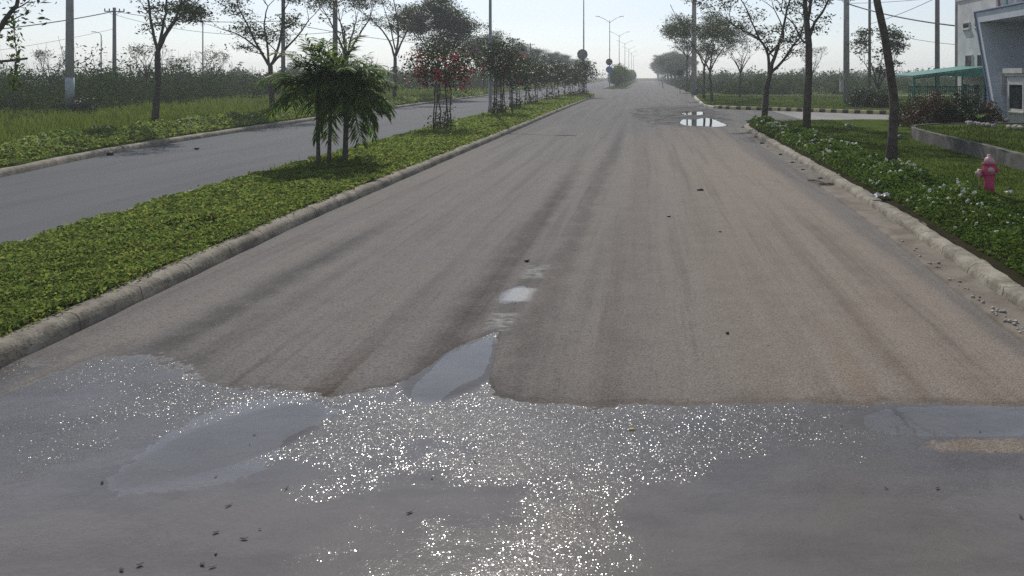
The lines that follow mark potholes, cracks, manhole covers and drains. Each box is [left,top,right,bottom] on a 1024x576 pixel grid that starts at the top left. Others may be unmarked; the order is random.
pothole [680,118,727,127]
